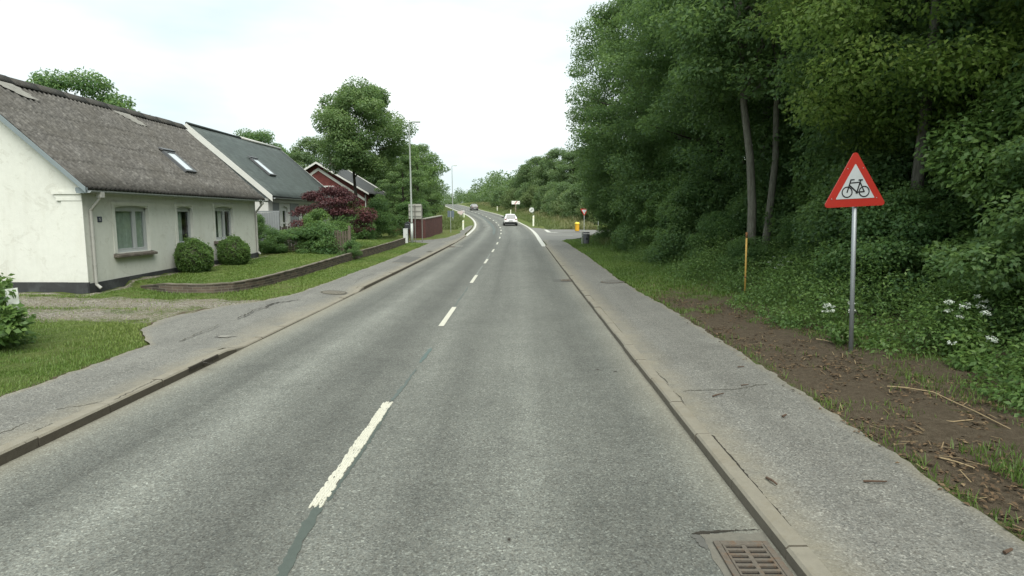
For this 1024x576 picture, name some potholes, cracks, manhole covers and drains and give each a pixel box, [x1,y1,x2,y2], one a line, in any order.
drain grate [713,541,794,576]
